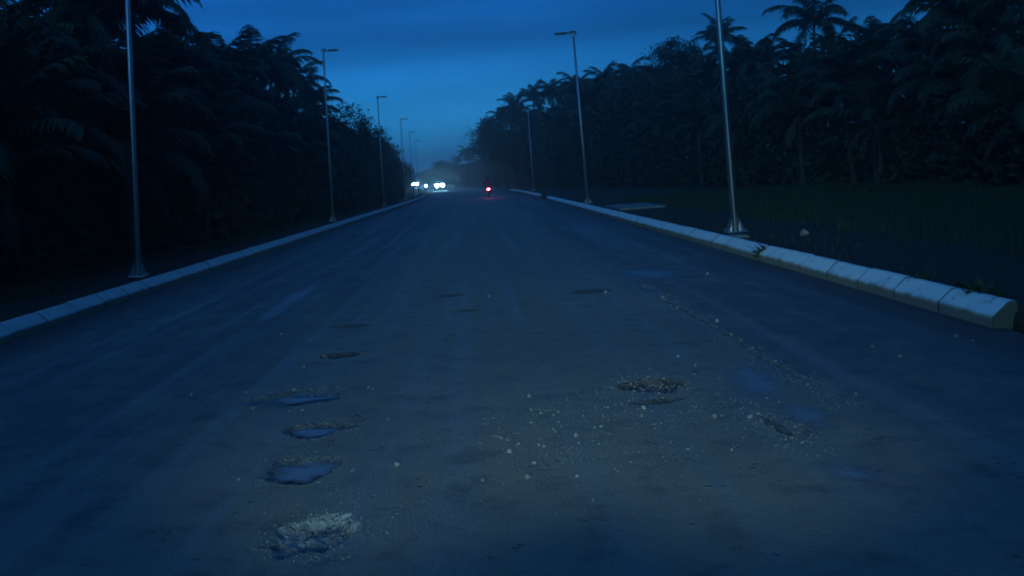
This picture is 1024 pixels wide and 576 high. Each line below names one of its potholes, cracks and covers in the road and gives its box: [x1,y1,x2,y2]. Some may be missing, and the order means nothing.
pothole [264,512,362,561]
crack [657,295,846,400]
pothole [280,418,362,439]
pothole [234,385,352,407]
pothole [258,456,343,485]
pothole [616,378,687,394]
